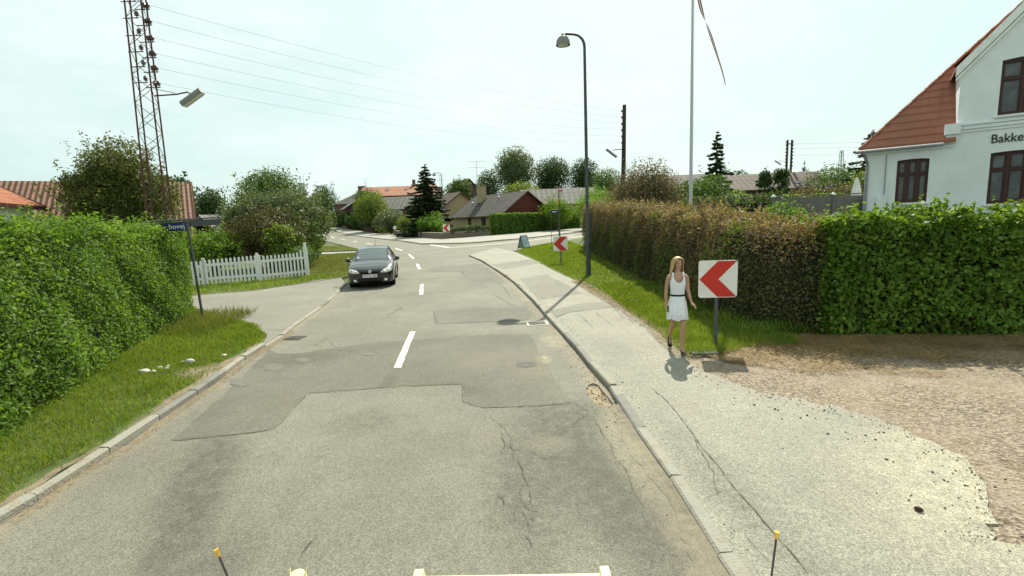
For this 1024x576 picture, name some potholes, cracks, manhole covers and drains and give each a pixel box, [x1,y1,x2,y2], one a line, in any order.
pothole [586,383,613,406]
crack [484,418,553,547]
